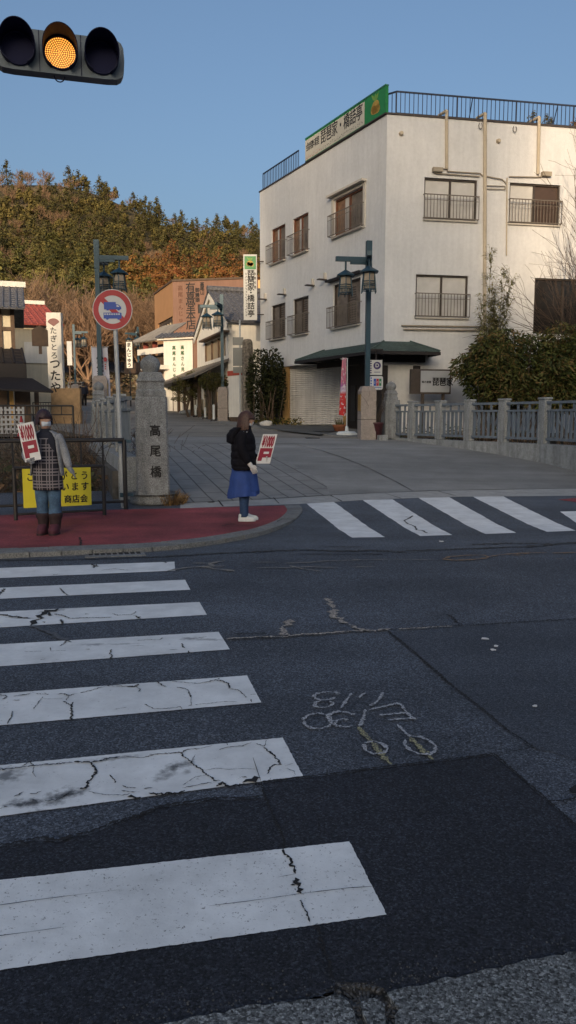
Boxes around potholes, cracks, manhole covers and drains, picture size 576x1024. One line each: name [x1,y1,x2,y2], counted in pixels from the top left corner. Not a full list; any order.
crack [227,598,576,639]
crack [282,844,310,922]
